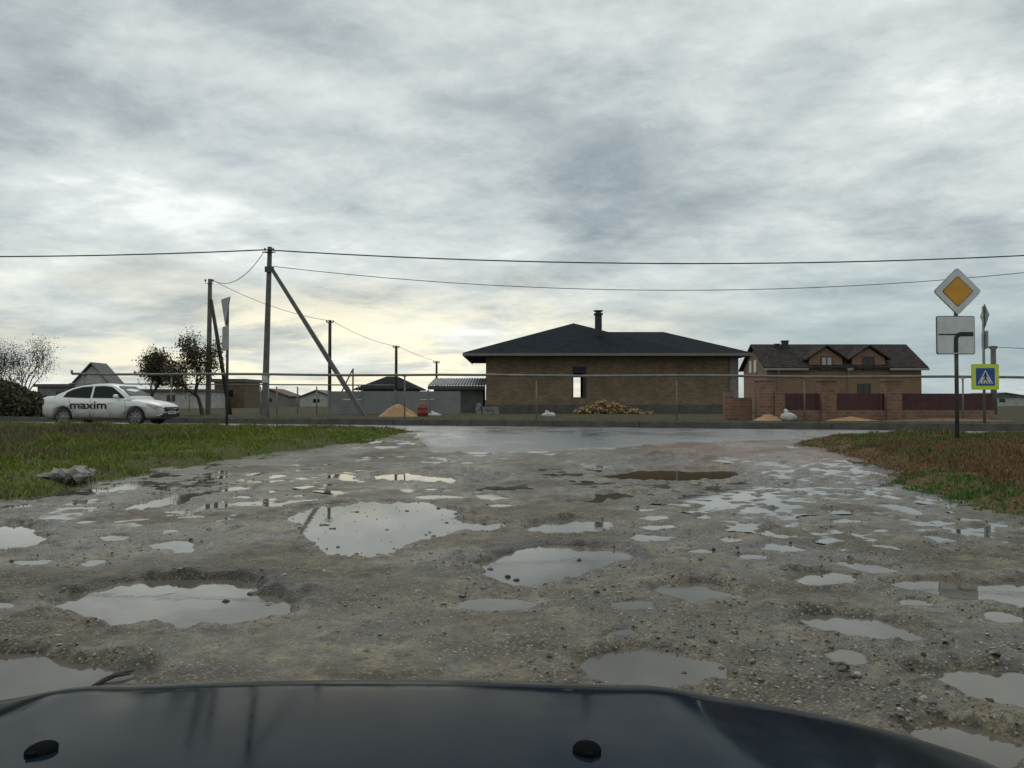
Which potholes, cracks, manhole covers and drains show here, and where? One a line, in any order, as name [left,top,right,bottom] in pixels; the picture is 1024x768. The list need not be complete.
pothole [770,563,883,589]
pothole [517,511,632,536]
pothole [875,568,1024,608]
pothole [0,516,66,552]
pothole [583,463,752,483]
pothole [25,564,322,633]
pothole [541,634,768,696]
pothole [862,698,1024,768]
pothole [265,496,523,560]
pothole [620,570,767,606]
pothole [128,535,213,556]
pothole [779,600,957,648]
